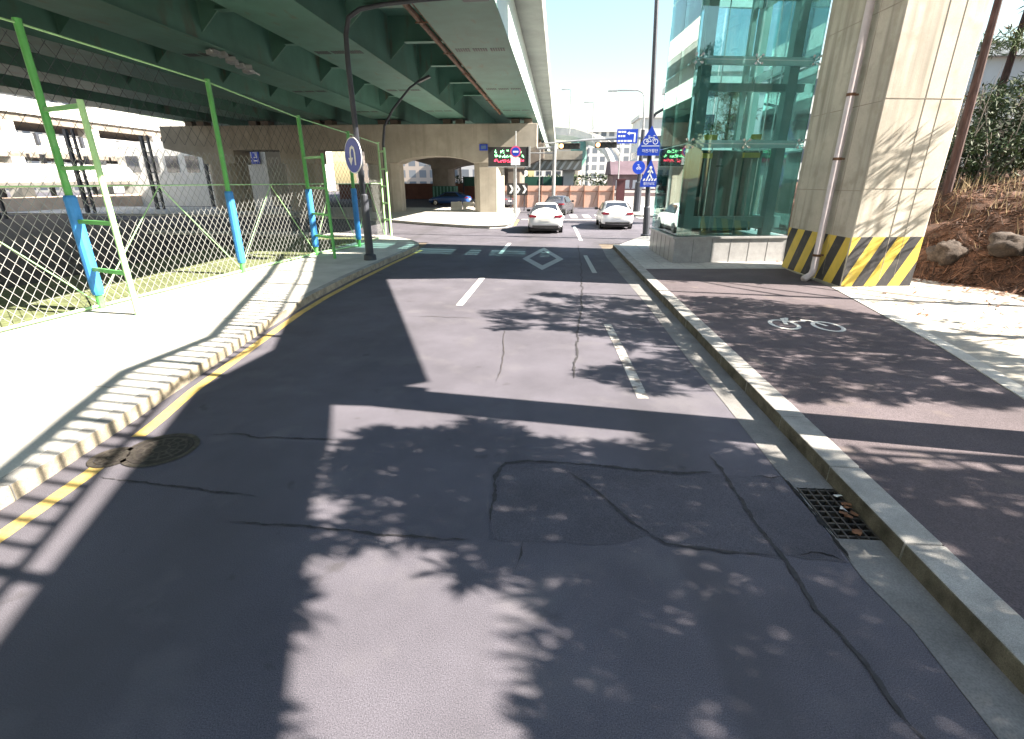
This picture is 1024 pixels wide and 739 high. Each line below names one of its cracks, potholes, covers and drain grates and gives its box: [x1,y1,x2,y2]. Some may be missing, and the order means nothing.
manhole cover [86,447,137,468]
drain grate [797,487,881,540]
crack [572,245,652,377]
crack [102,477,463,540]
crack [752,475,850,559]
manhole cover [119,433,200,467]
